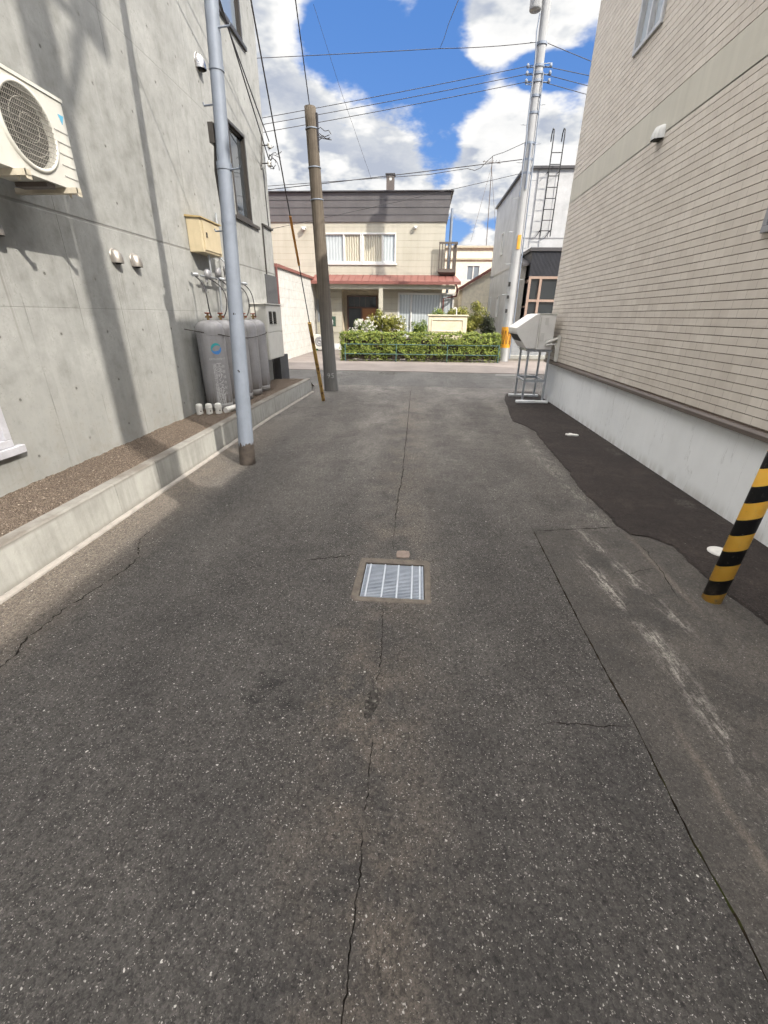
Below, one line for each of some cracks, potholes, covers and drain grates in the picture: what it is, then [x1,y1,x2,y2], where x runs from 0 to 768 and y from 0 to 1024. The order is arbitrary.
drain grate [351,558,432,604]
crack [0,532,149,668]
crack [341,734,374,1024]
crack [374,608,384,684]
